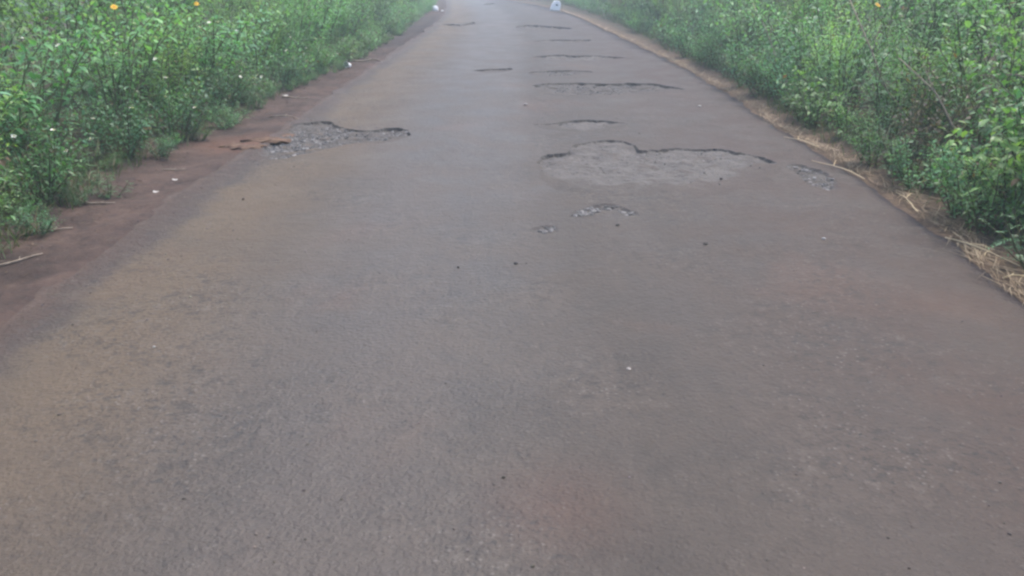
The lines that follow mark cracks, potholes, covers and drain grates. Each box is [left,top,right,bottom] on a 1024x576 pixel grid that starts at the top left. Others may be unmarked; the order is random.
pothole [253,121,411,162]
